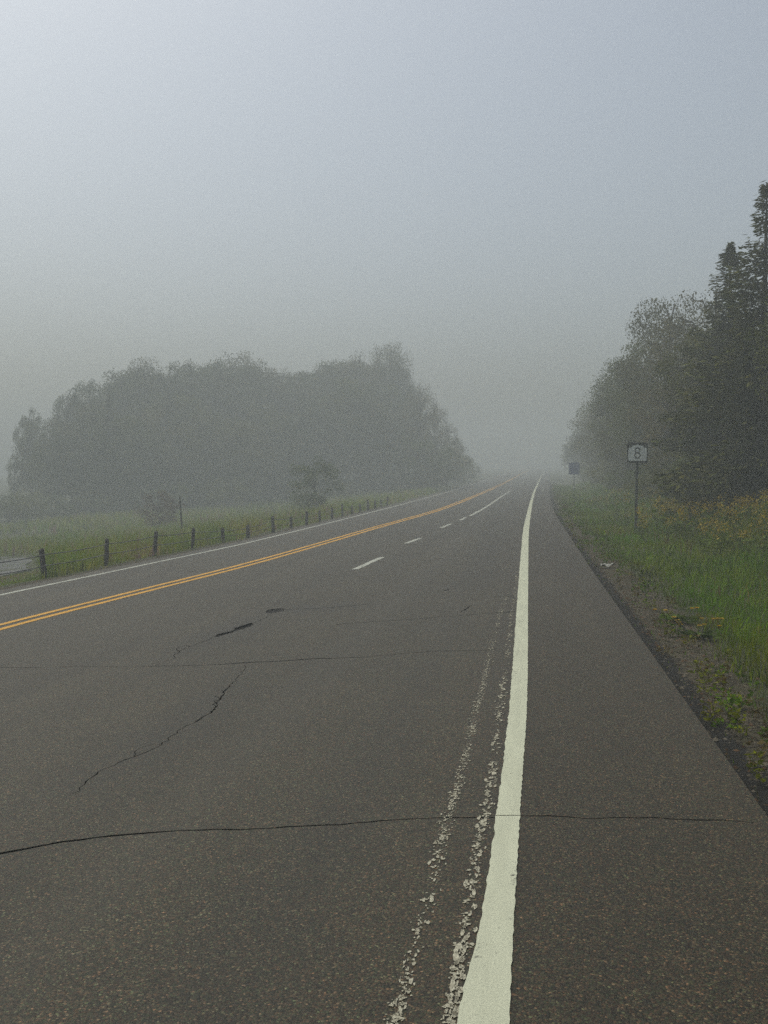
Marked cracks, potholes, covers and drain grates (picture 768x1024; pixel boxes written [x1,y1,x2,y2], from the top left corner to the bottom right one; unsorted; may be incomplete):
crack [3,636,492,794]
crack [0,815,754,855]
